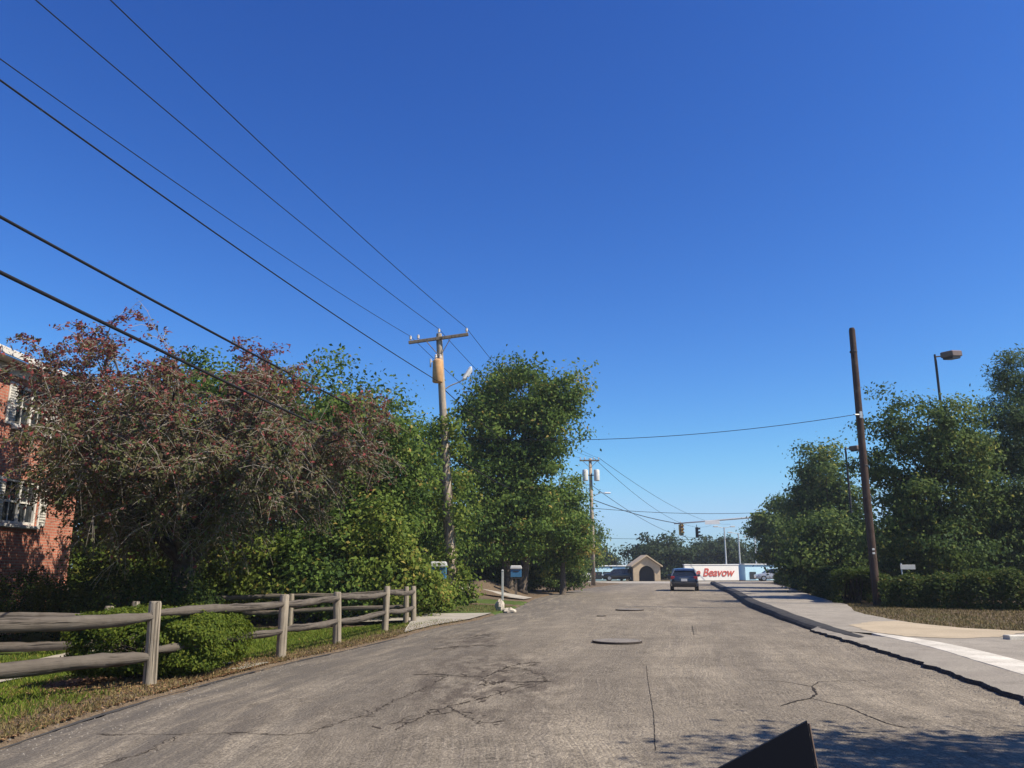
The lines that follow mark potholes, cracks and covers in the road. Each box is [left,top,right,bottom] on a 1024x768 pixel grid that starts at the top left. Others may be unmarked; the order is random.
crack [752,679,907,728]
crack [97,662,551,765]
